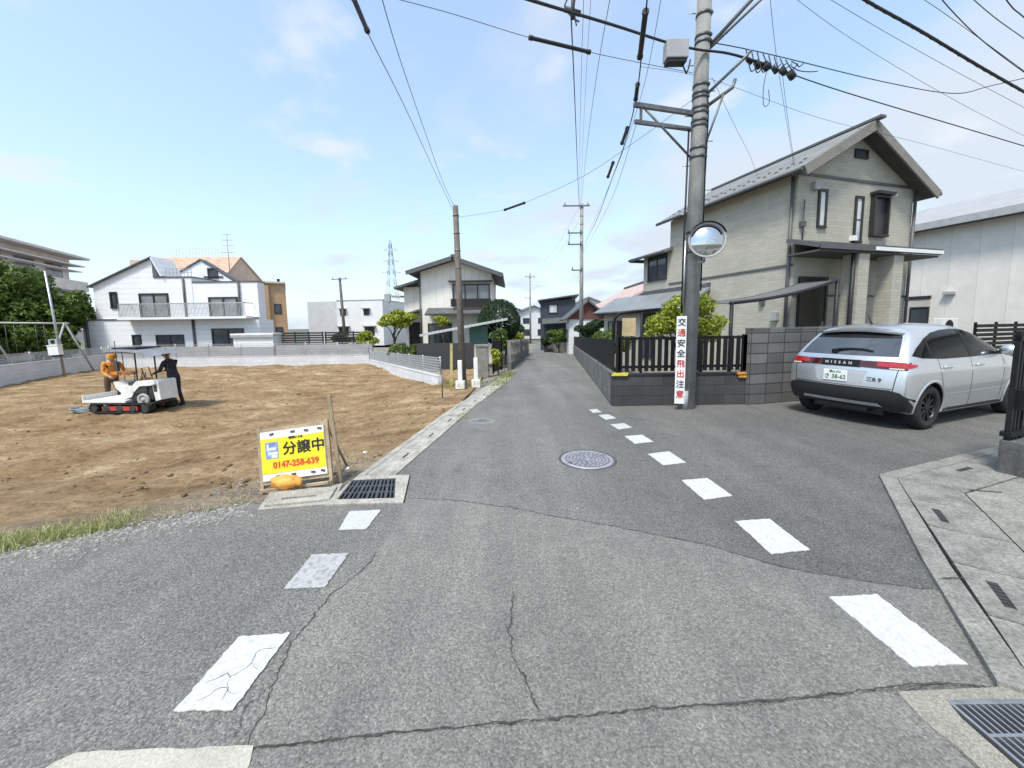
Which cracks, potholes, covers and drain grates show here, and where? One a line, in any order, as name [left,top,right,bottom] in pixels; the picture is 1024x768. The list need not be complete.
crack [197,554,991,748]
drain grate [897,687,1024,768]
drain grate [323,475,410,506]
manhole cover [558,450,617,470]
